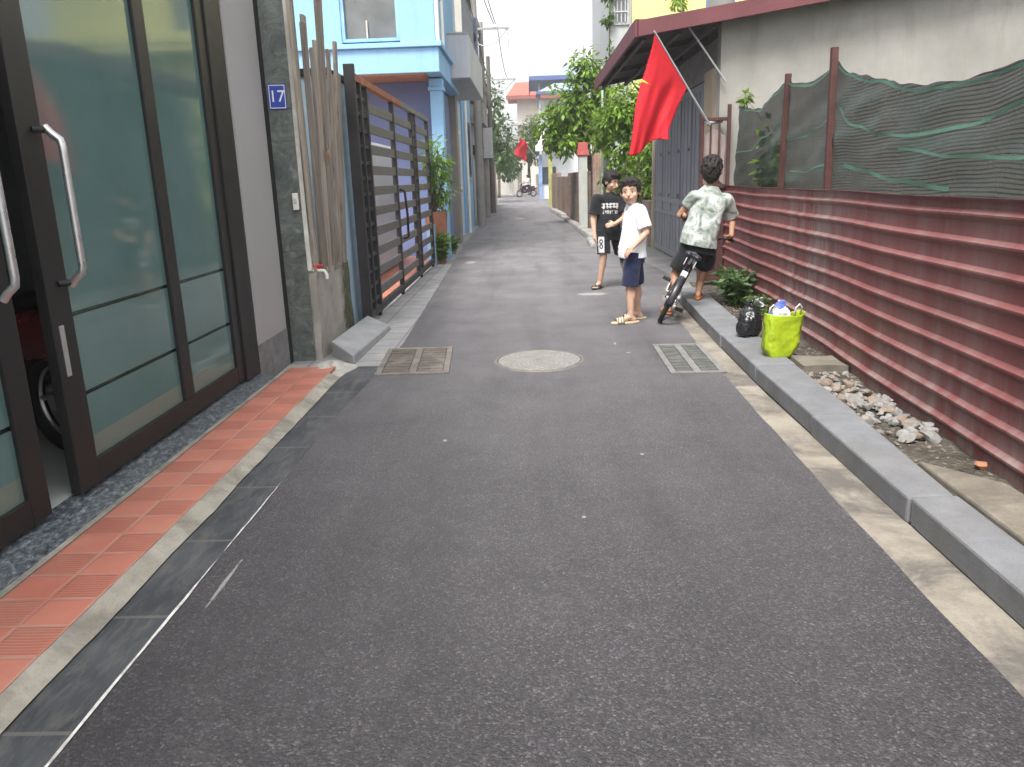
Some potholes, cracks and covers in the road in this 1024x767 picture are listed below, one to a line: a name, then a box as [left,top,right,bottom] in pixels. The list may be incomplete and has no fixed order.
drain grate [375,346,453,376]
manhole cover [494,349,585,372]
drain grate [652,343,727,374]
